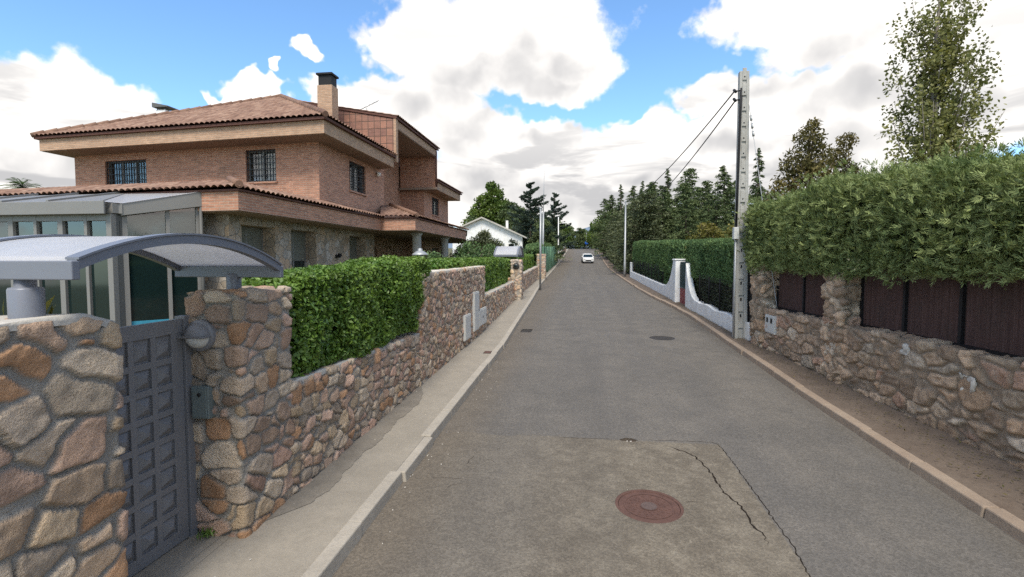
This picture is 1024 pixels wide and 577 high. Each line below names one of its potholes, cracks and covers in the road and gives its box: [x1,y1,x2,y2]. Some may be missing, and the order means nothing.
manhole cover [615,489,684,523]
crack [664,445,769,543]
